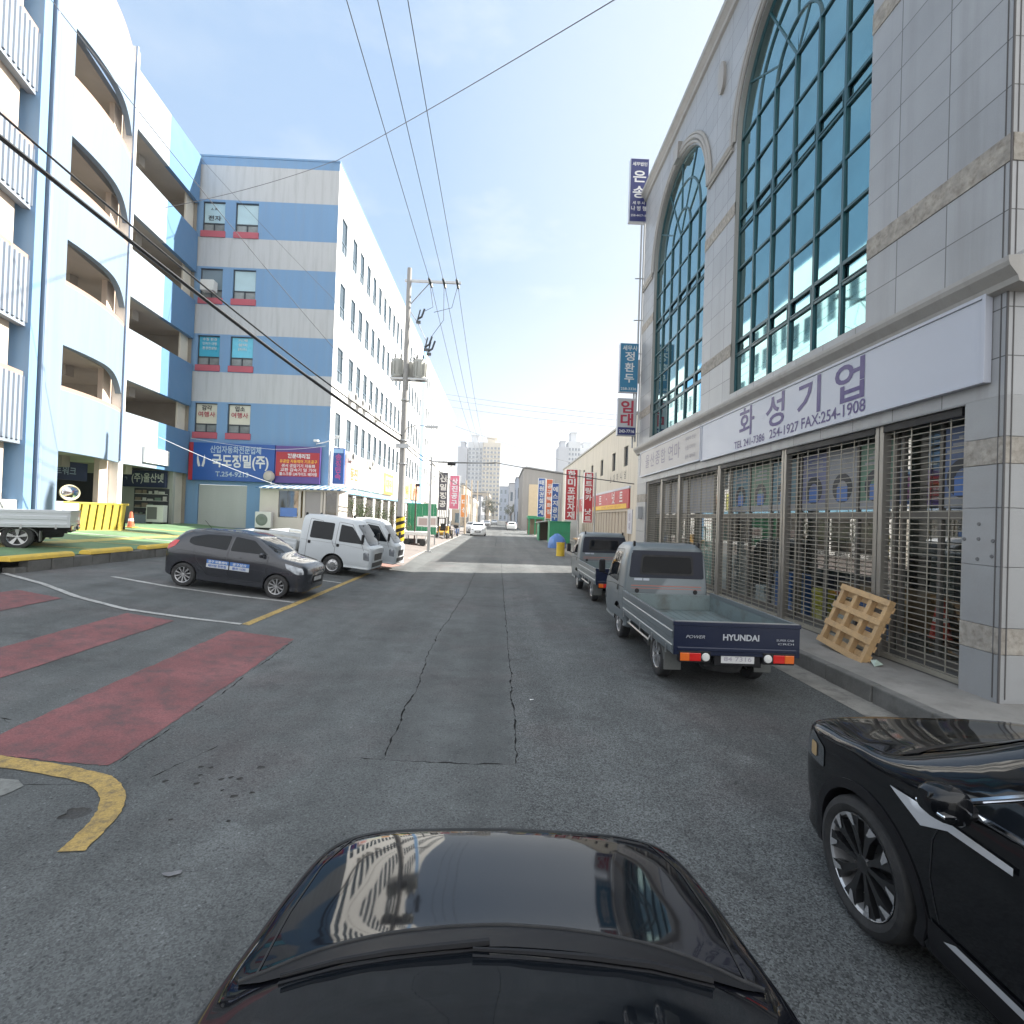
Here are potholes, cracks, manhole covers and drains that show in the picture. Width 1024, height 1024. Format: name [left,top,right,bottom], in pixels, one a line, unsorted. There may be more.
crack [360,564,518,765]
